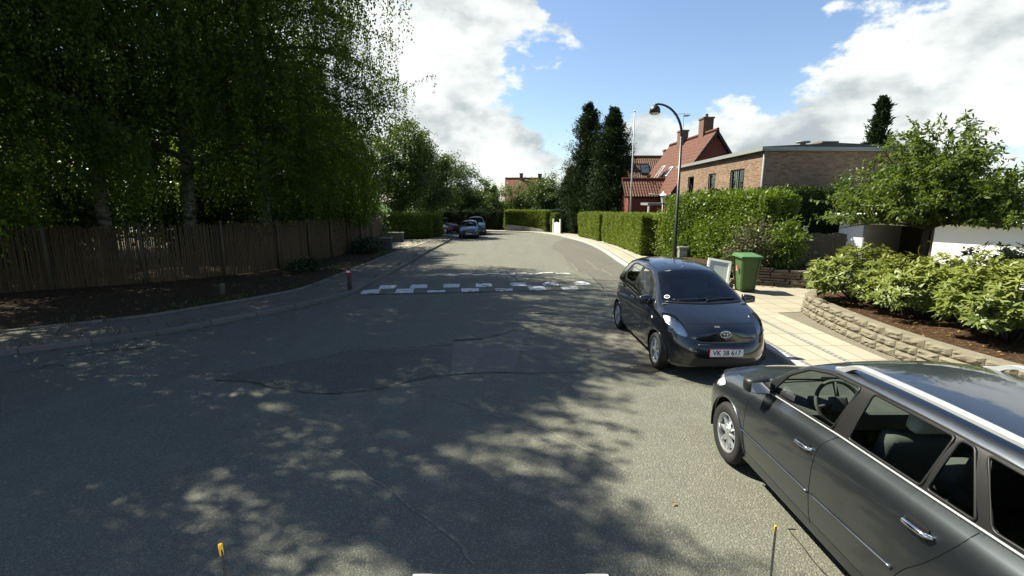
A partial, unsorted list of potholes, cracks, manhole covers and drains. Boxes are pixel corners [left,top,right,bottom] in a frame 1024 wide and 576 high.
crack [215,367,623,409]
